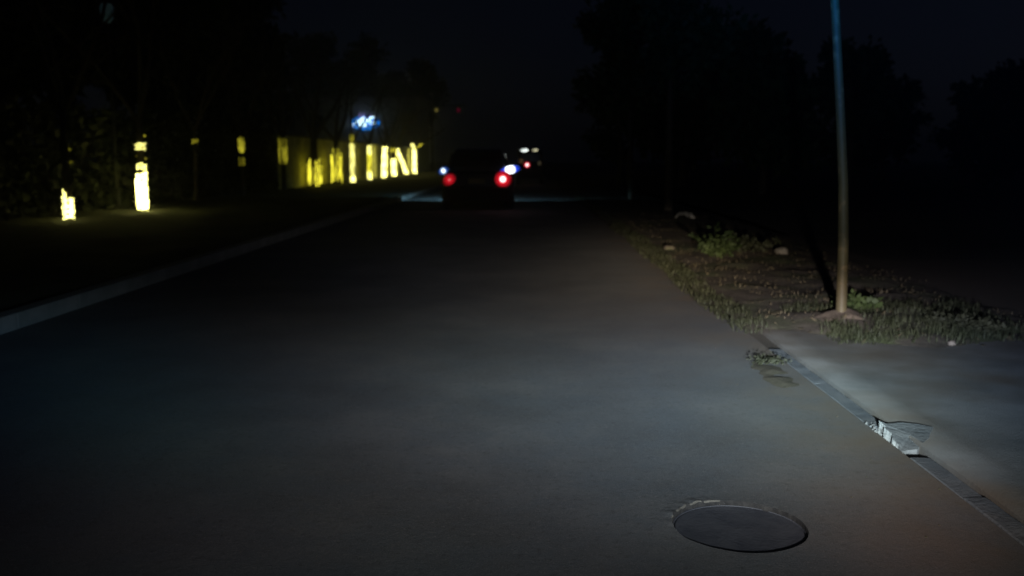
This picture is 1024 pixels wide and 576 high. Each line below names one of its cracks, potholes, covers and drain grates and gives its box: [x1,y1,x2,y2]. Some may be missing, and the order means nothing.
manhole cover [673,505,807,553]
